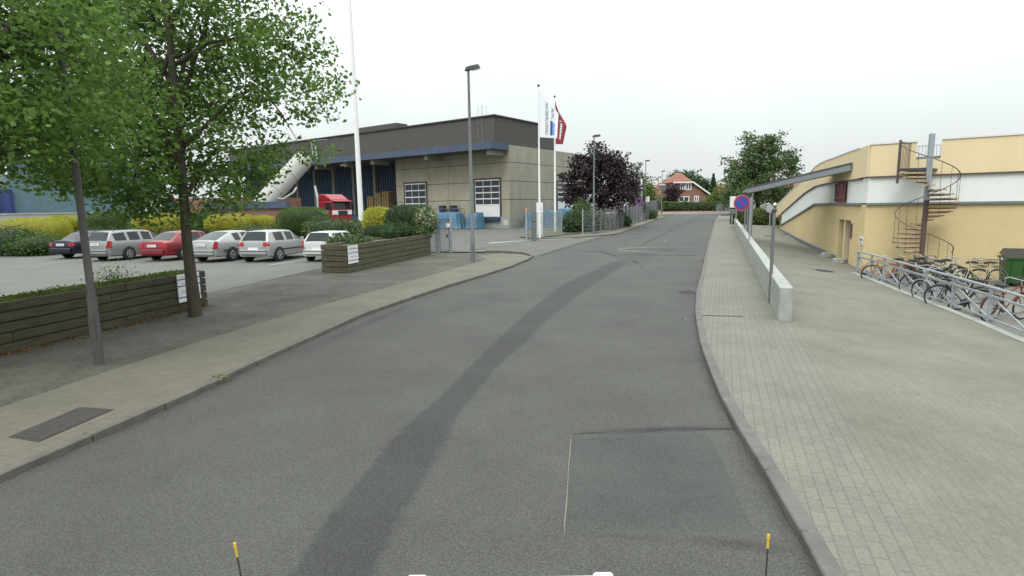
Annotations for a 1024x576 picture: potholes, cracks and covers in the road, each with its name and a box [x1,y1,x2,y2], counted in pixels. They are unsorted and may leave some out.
manhole cover [9,407,114,442]
